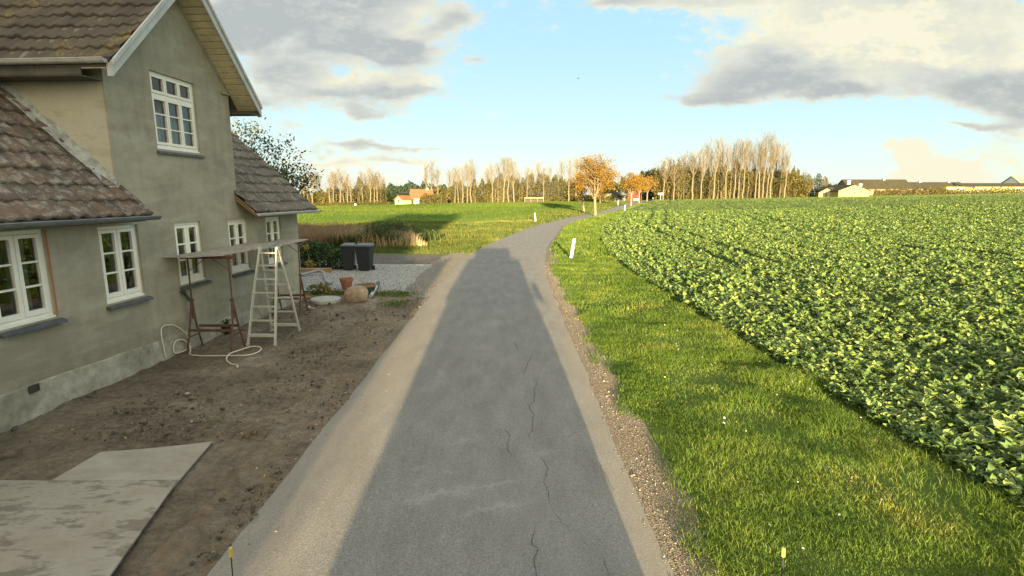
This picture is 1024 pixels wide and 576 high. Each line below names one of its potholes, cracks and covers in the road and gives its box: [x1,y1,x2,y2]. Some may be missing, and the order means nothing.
crack [515,342,587,545]
